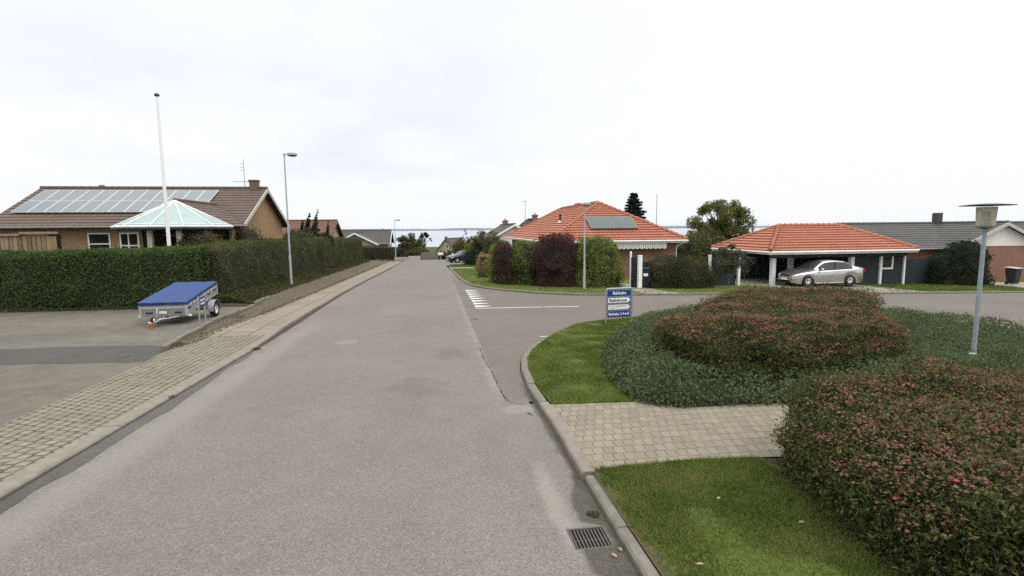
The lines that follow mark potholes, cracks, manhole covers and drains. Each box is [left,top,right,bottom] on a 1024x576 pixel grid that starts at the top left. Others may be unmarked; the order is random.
drain grate [566,525,615,550]
